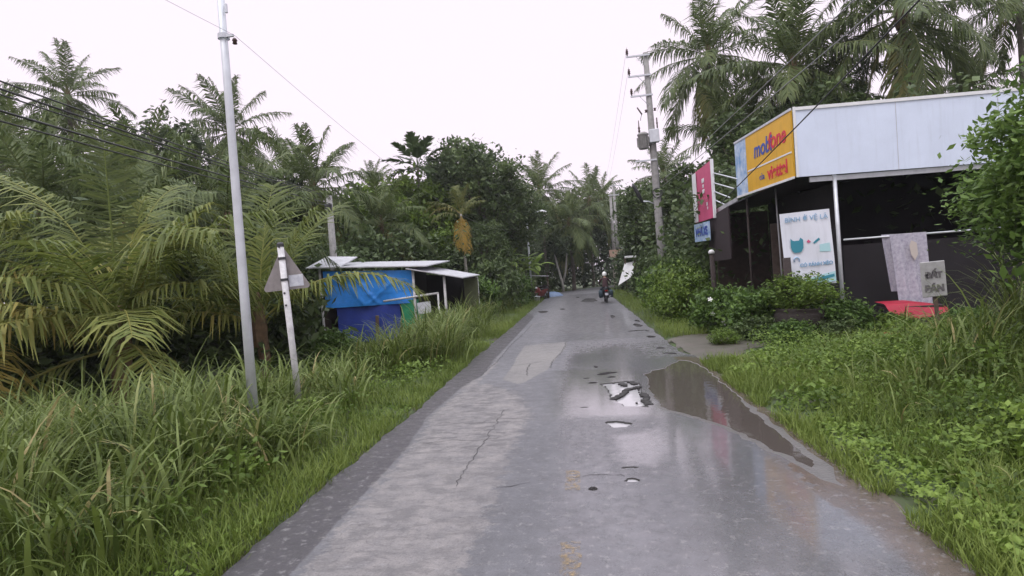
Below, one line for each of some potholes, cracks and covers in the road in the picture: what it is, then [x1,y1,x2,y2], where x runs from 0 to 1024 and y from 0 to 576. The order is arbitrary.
pothole [600,381,654,407]
crack [430,410,515,486]
